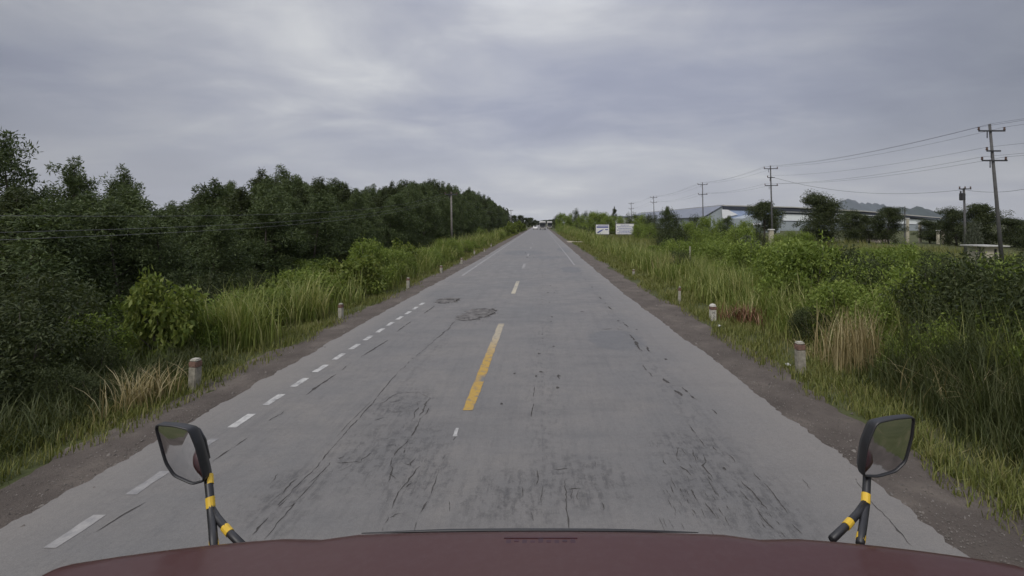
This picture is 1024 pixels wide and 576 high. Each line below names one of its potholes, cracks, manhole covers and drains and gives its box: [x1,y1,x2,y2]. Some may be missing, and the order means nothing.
crack [501,285,717,415]
pothole [454,308,498,321]
crack [253,298,543,536]
crack [562,462,604,527]
